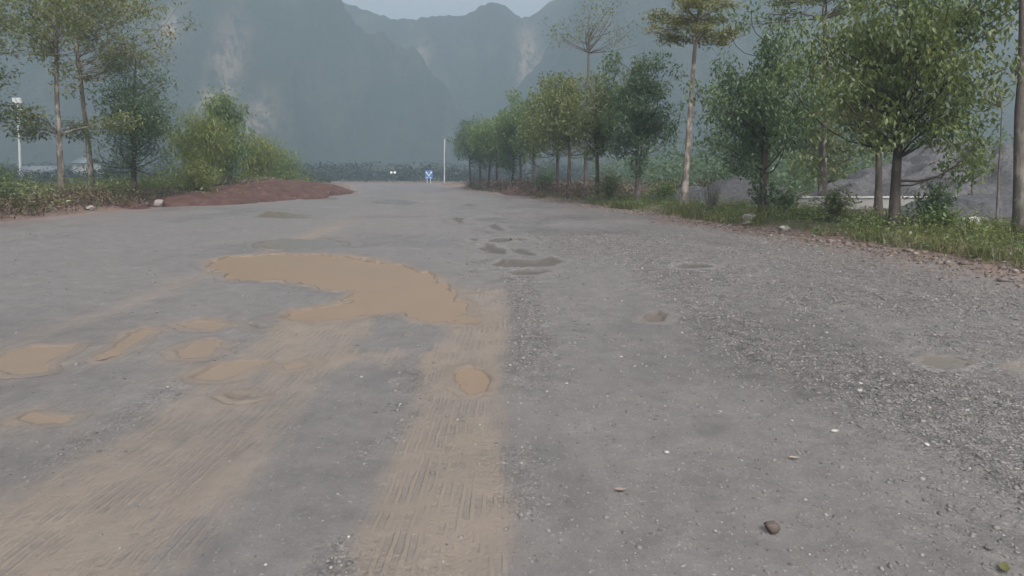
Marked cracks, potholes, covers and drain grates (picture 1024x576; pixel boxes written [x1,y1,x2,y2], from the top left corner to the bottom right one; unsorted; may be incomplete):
pothole [440,362,501,400]
pothole [628,308,682,326]
pothole [0,342,93,379]
pothole [481,223,516,233]
pothole [505,247,544,257]
pothole [663,261,726,271]
pothole [157,335,235,362]
pothole [468,242,515,257]
pothole [481,255,573,270]
pothole [166,317,236,333]
pothole [497,267,564,277]
pothole [211,386,277,405]
